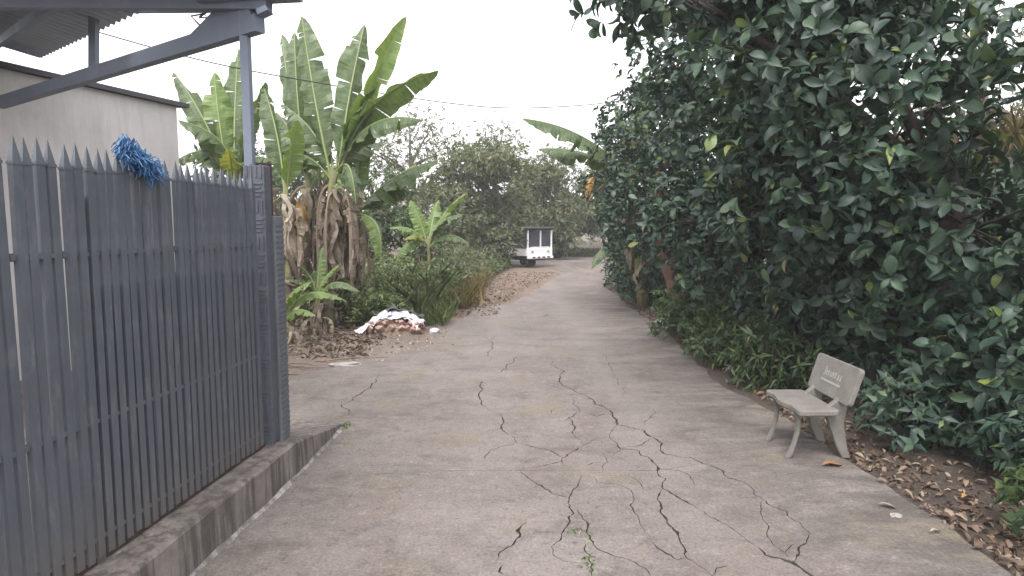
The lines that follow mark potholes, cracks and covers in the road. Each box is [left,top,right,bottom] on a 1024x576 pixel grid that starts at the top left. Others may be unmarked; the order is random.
crack [478,353,813,576]
